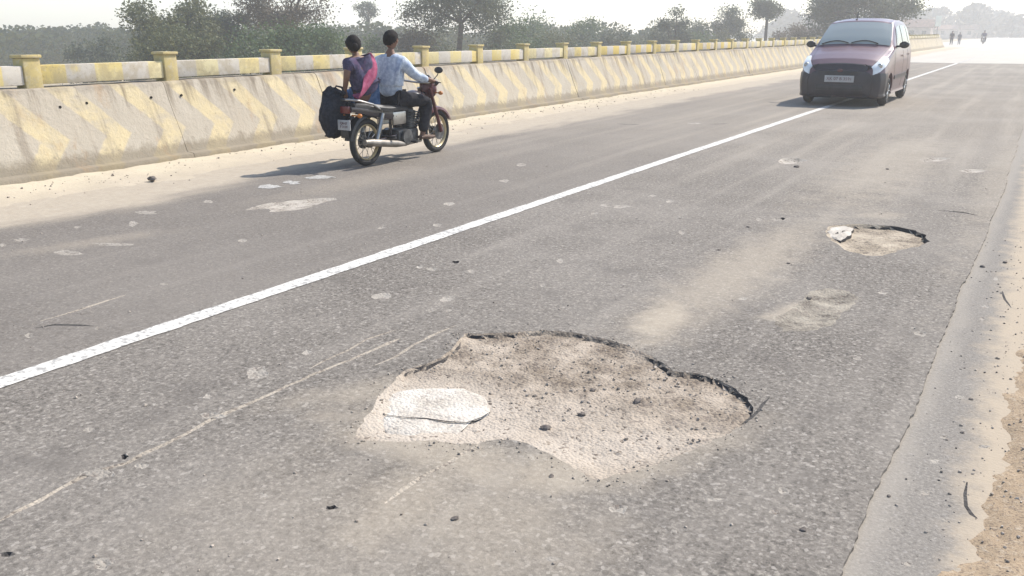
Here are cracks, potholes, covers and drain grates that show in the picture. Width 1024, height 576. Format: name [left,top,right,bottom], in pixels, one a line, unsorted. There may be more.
pothole [353,330,753,480]
pothole [825,224,930,256]
